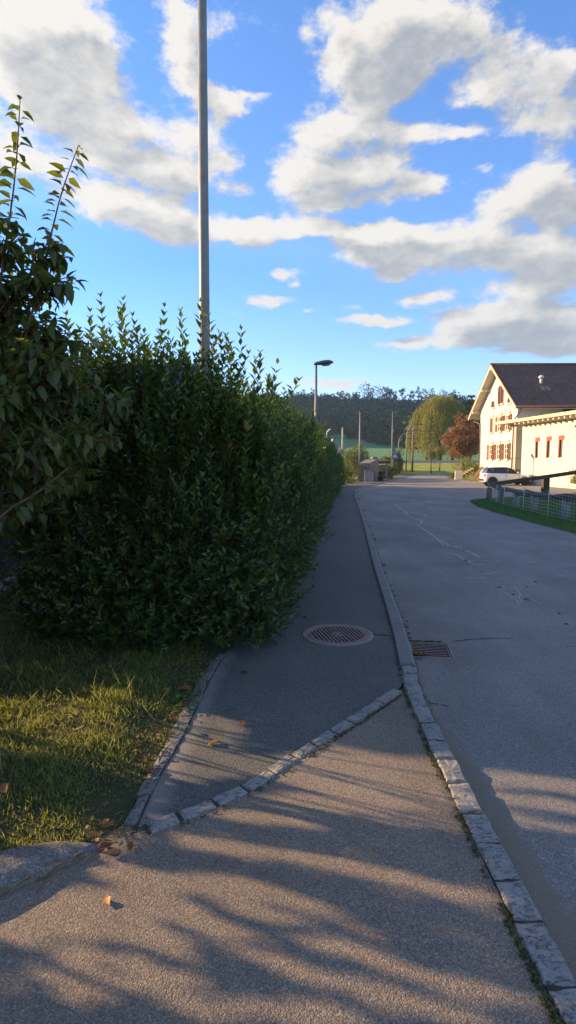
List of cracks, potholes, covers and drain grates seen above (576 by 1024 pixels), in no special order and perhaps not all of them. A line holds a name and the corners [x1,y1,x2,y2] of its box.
crack [450,553,541,604]
drain grate [409,641,455,659]
manhole cover [302,624,373,646]
